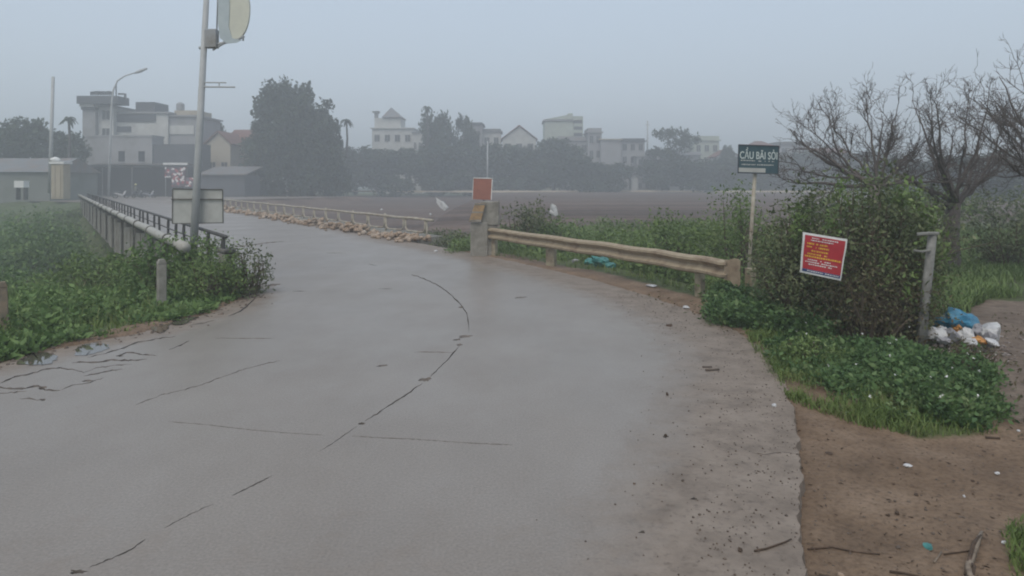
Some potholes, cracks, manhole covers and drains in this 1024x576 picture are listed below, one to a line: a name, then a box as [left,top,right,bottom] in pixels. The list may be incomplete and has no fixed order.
crack [136,361,276,405]
crack [322,348,458,450]
crack [411,274,469,327]
crack [0,299,254,401]
